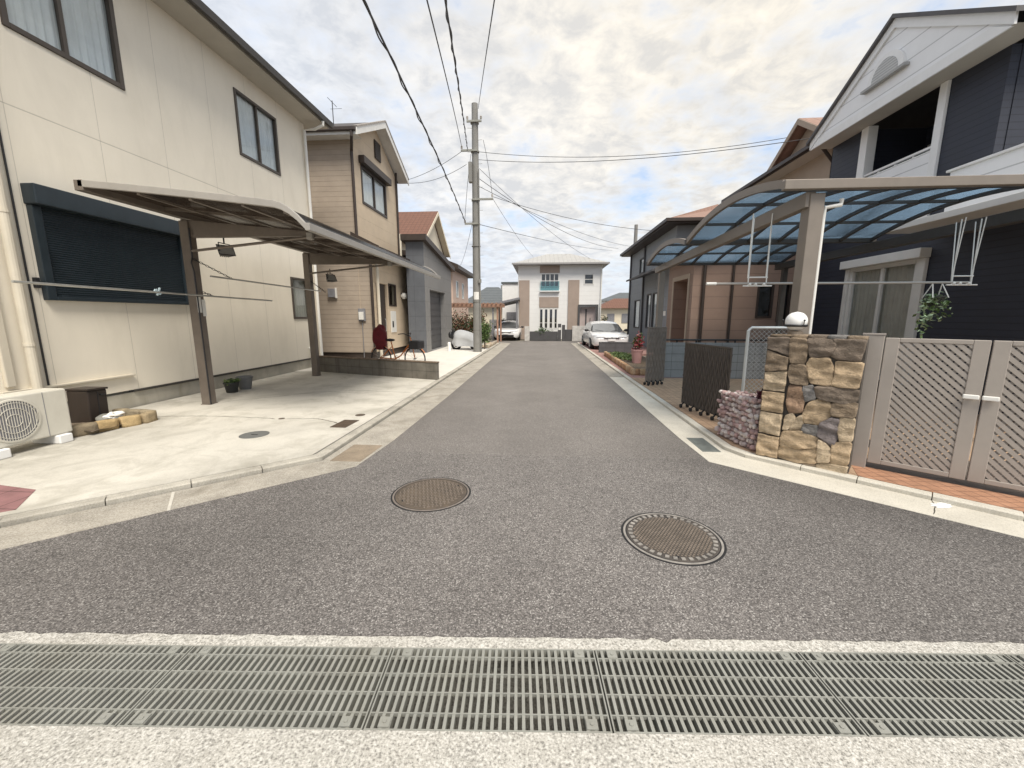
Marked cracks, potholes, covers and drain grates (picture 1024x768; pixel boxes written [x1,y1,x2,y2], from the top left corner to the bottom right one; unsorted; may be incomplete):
drain grate [116,645,393,730]
drain grate [595,649,868,737]
drain grate [1005,654,1024,668]
manhole cover [390,478,471,512]
drain grate [330,420,359,428]
drain grate [363,647,613,733]
drain grate [0,643,194,727]
manhole cover [621,512,727,566]
drain grate [687,438,721,452]
